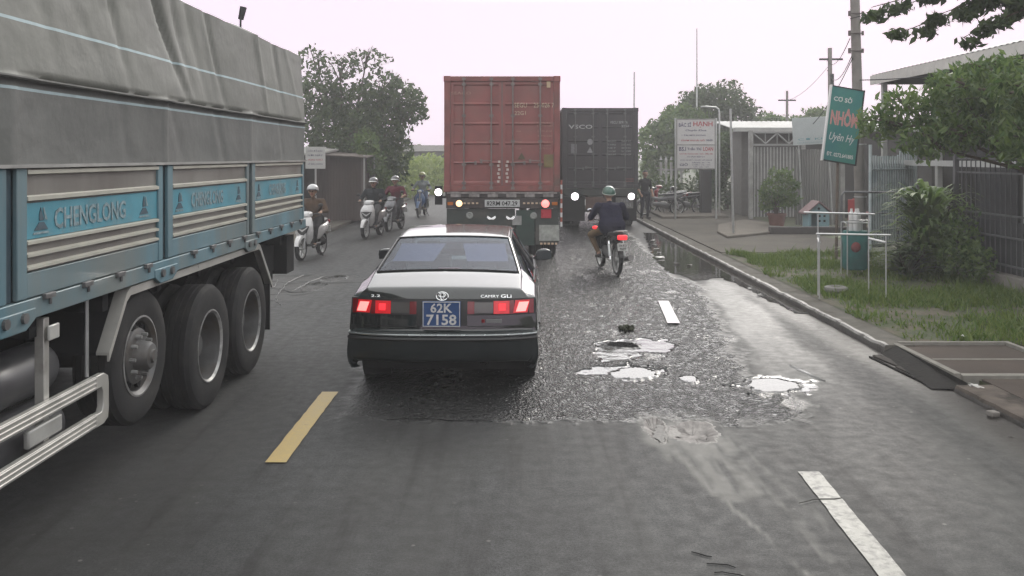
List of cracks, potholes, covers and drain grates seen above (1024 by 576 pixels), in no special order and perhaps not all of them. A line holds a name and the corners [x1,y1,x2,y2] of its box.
crack [789,364,825,381]
pothole [641,416,681,445]
pothole [653,420,721,445]
crack [270,275,366,306]
pothole [607,366,660,381]
pothole [677,375,700,384]
pothole [603,341,642,349]
pothole [747,377,805,394]
